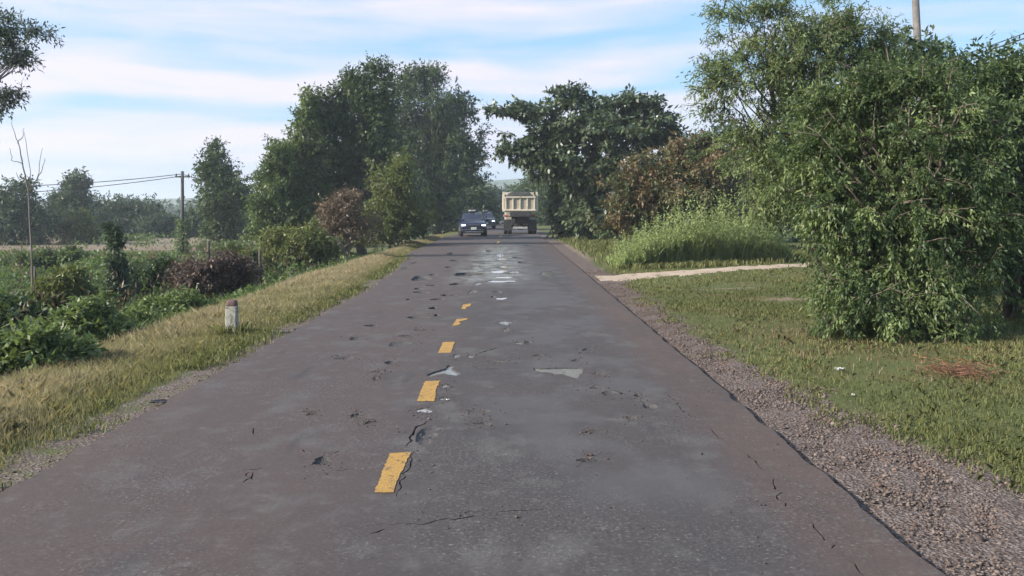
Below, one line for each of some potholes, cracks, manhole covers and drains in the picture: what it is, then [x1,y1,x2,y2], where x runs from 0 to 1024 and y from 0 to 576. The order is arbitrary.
pothole [427,365,461,377]
crack [396,420,434,497]
pothole [312,456,331,465]
crack [371,509,541,534]
pothole [415,426,441,446]
